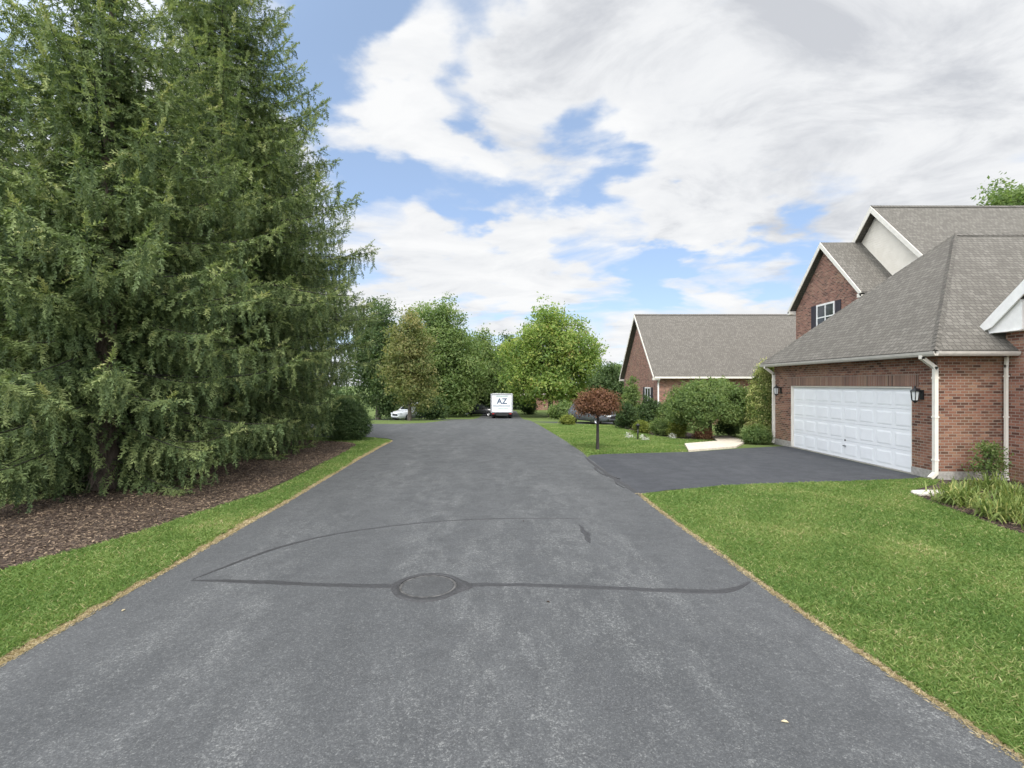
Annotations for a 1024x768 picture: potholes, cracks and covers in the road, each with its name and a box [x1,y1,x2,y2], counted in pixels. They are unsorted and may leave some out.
manhole cover [390,573,473,602]
